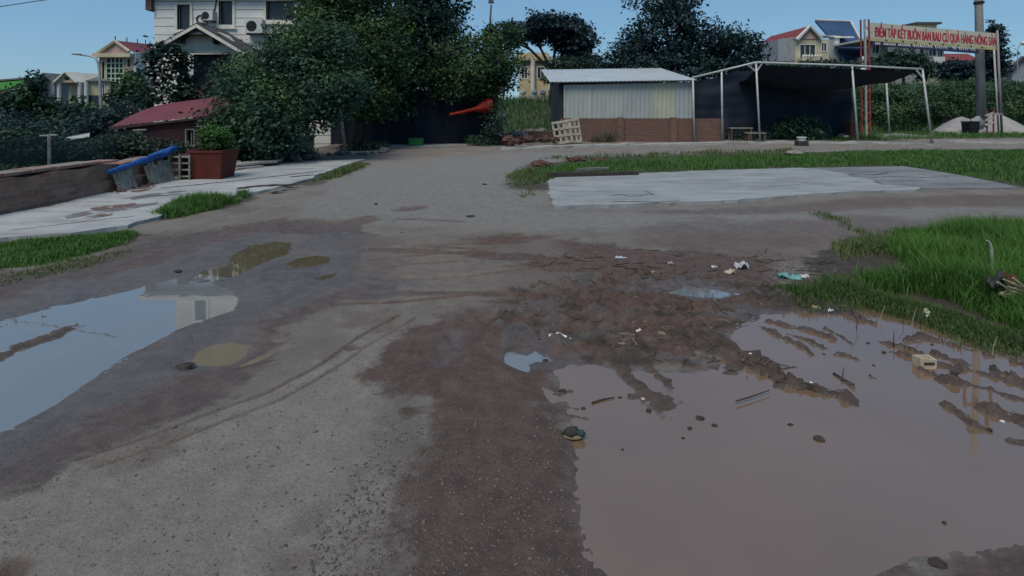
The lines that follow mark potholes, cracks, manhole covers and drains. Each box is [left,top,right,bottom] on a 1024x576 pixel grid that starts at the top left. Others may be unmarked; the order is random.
pothole [0,272,258,443]
pothole [659,282,741,301]
pothole [499,343,559,373]
pothole [530,302,1024,576]
